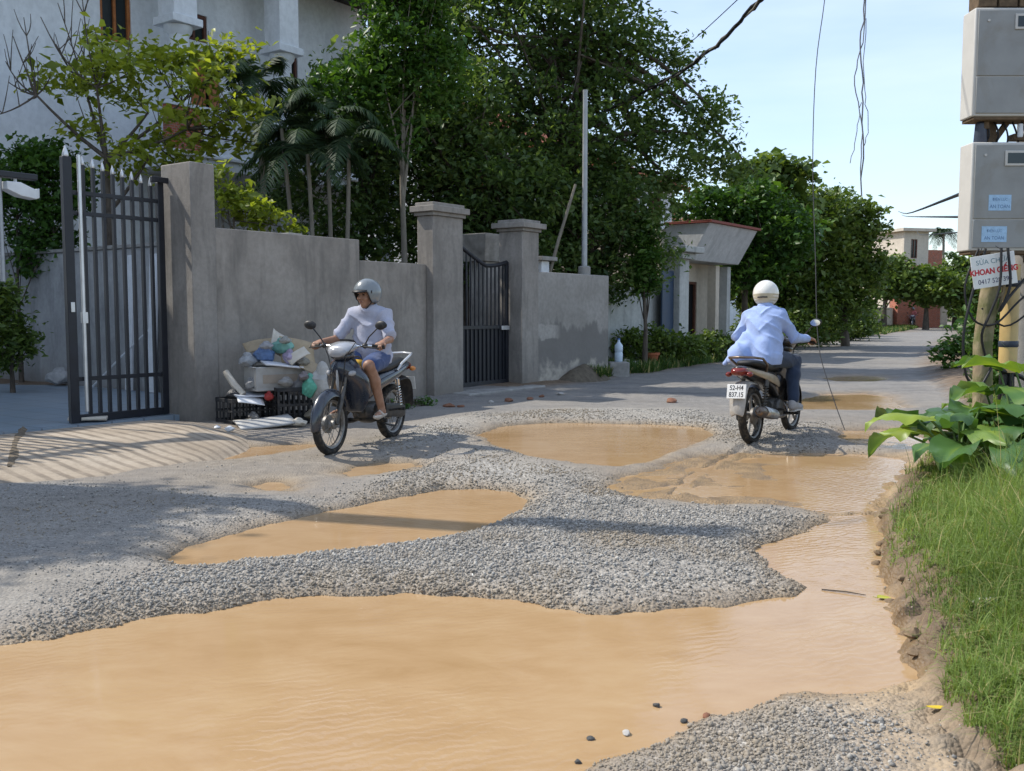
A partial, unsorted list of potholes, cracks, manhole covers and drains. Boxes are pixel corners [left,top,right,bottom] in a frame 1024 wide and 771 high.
pothole [247,478,302,491]
pothole [802,391,910,410]
pothole [473,419,716,466]
pothole [334,459,425,477]
pothole [597,450,918,516]
pothole [0,510,941,771]
pothole [154,484,531,565]
